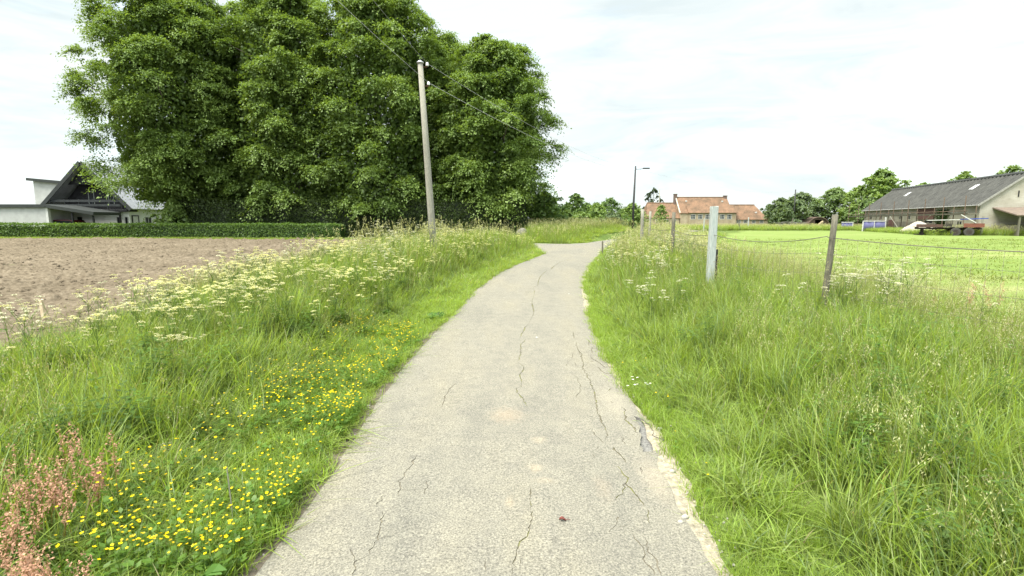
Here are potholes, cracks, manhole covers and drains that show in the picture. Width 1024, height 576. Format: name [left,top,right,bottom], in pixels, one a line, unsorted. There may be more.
crack [512,489,533,572]
pothole [634,416,664,452]
crack [350,457,428,576]
crack [566,333,661,575]
crack [516,263,558,406]
